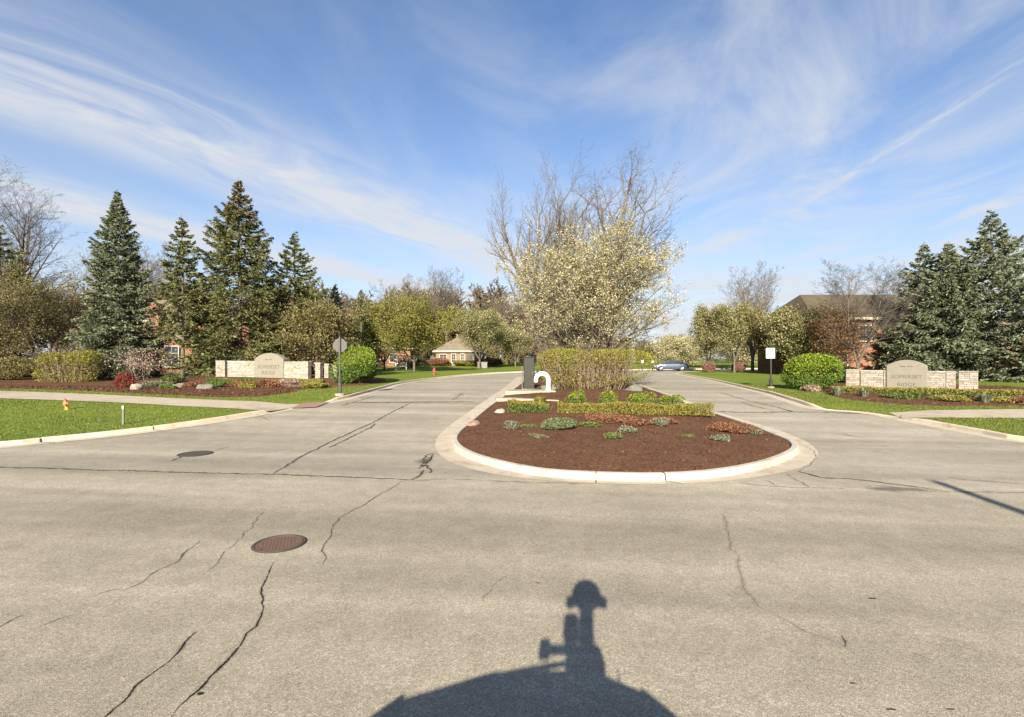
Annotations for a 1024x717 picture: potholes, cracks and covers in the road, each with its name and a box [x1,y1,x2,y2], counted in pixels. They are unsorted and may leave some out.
crack [104,565,272,717]
crack [321,453,433,565]
manhole cover [251,534,307,553]
